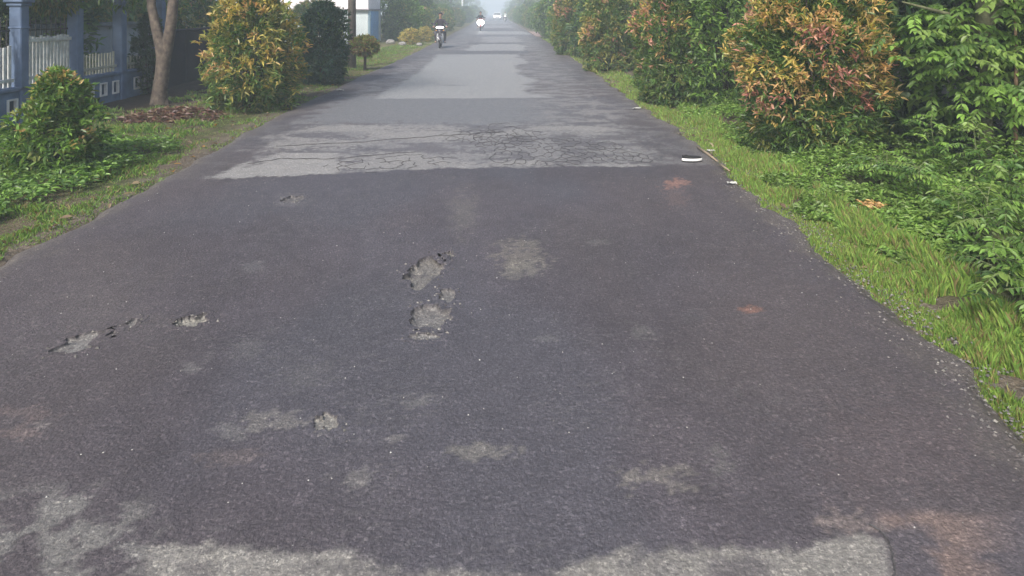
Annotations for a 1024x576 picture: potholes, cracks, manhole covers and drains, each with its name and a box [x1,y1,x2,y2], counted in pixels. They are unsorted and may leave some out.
pothole [162,310,217,331]
pothole [431,285,463,306]
crack [248,123,653,173]
pothole [302,406,349,438]
pothole [396,253,452,294]
pothole [275,194,310,205]
pothole [35,325,130,358]
pothole [401,301,461,337]
